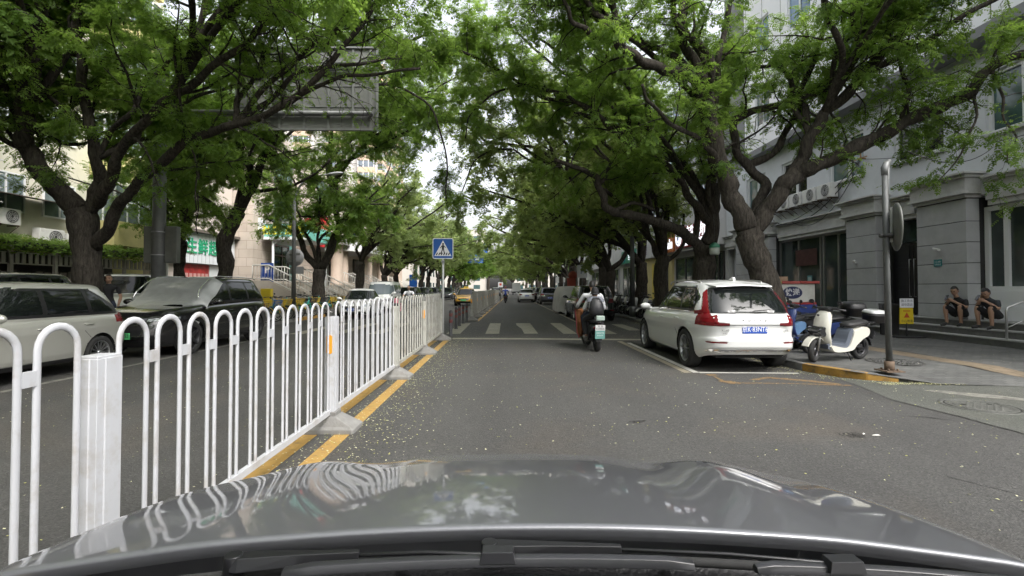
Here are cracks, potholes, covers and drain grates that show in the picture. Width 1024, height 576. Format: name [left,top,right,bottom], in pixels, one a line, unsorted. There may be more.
manhole cover [937,398,1024,415]
manhole cover [865,358,926,366]
